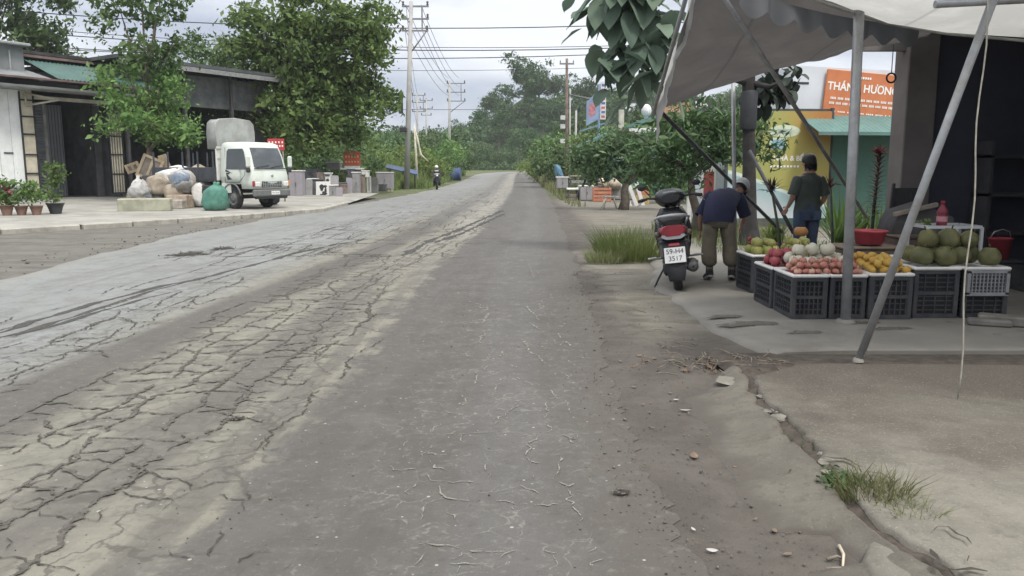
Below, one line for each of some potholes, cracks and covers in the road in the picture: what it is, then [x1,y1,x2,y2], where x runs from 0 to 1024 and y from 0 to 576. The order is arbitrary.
crack [0,188,511,576]
crack [929,526,988,572]
